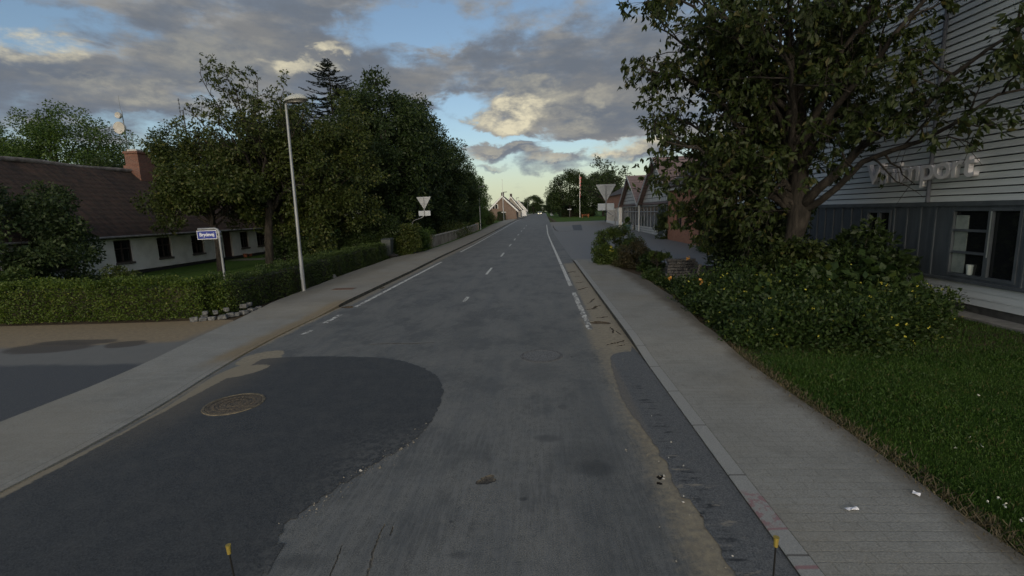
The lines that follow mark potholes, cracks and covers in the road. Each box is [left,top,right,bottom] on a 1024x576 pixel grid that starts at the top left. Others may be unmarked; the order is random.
manhole cover [520,349,563,362]
crack [366,524,393,576]
crack [329,546,342,576]
manhole cover [201,393,266,416]
